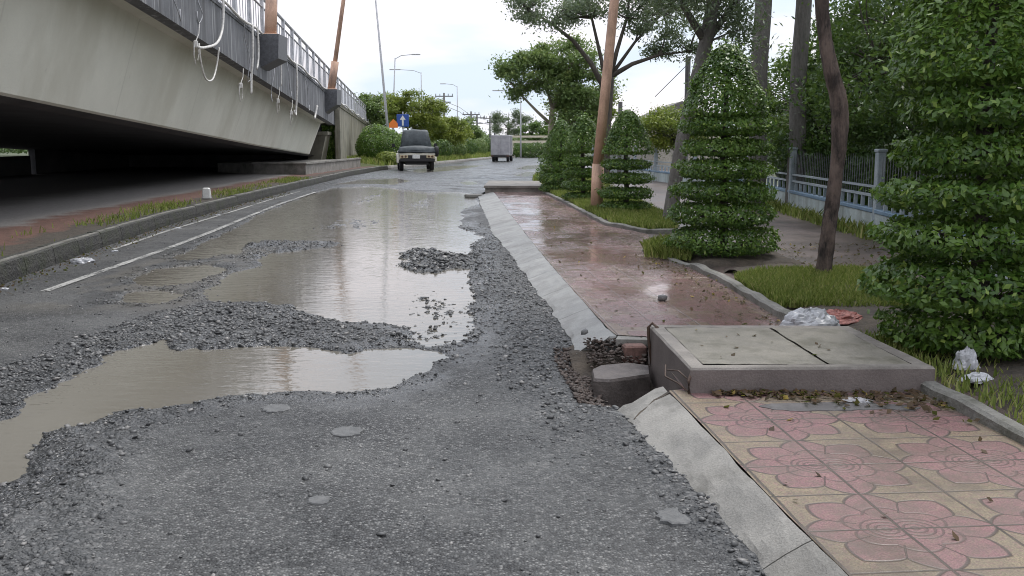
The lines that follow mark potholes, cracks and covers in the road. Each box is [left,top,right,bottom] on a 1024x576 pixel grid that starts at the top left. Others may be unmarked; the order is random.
pothole [119,262,242,288]
pothole [162,185,494,348]
pothole [0,334,467,505]
pothole [102,287,198,306]
